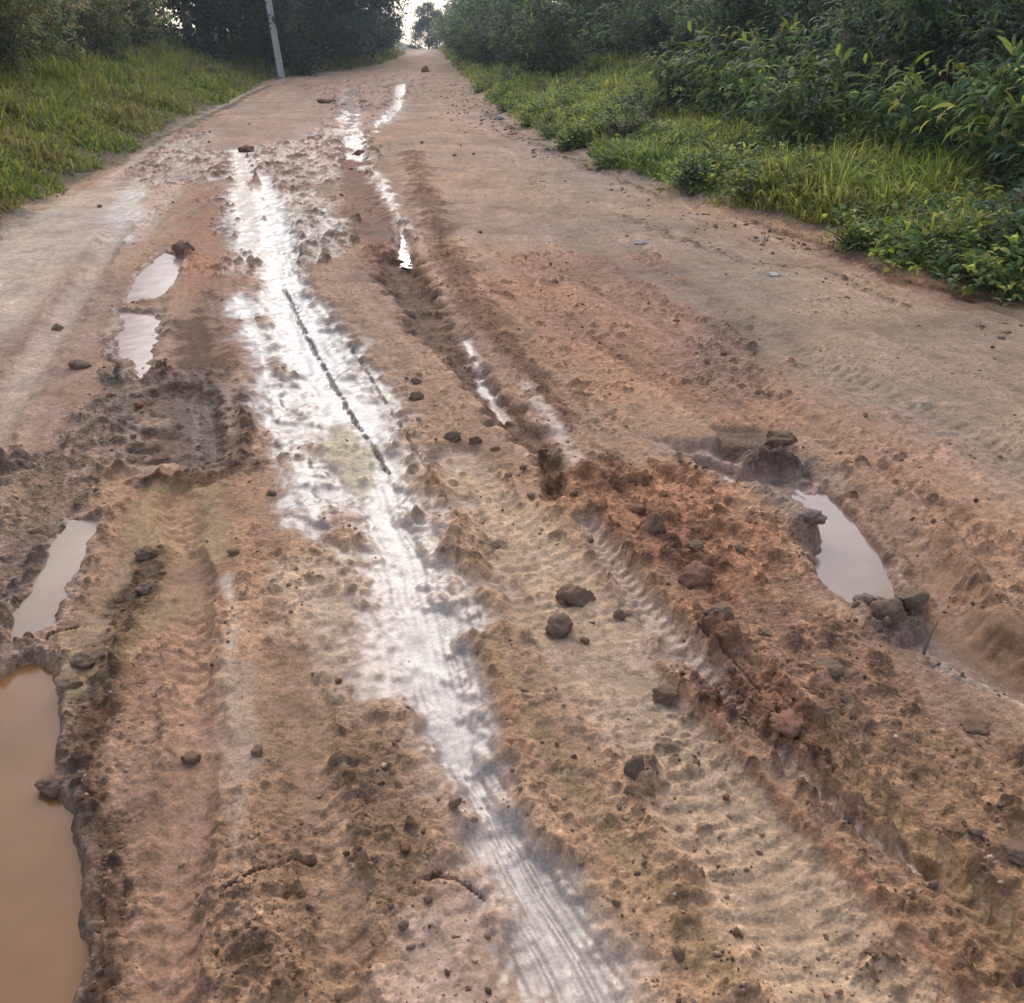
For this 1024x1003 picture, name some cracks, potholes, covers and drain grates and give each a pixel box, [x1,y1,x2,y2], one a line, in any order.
pothole [0,636,102,1003]
pothole [0,506,109,650]
crack [220,852,319,889]
pothole [121,248,191,304]
pothole [102,304,175,383]
pothole [655,442,923,633]
